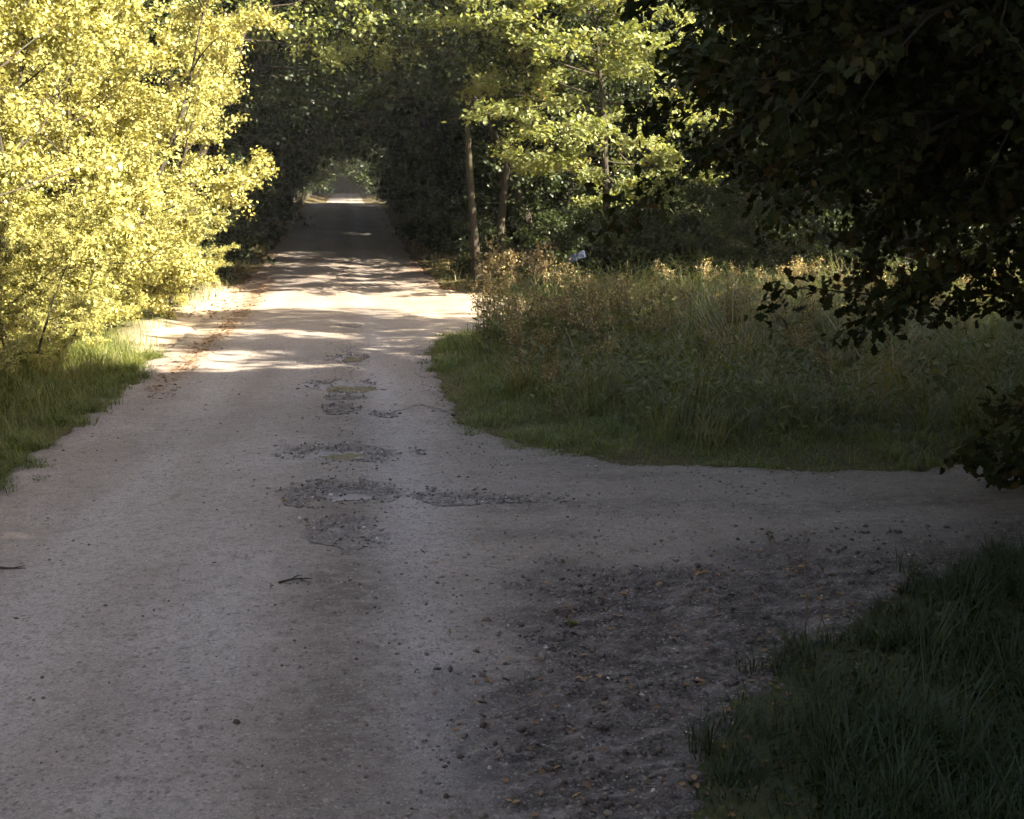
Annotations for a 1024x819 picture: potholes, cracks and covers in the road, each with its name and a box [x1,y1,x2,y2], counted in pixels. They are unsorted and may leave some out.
pothole [320,401,362,415]
pothole [323,392,369,400]
crack [393,404,456,416]
pothole [273,440,426,464]
pothole [295,501,388,555]
pothole [265,475,437,508]
pothole [404,487,575,507]
pothole [293,377,391,394]
